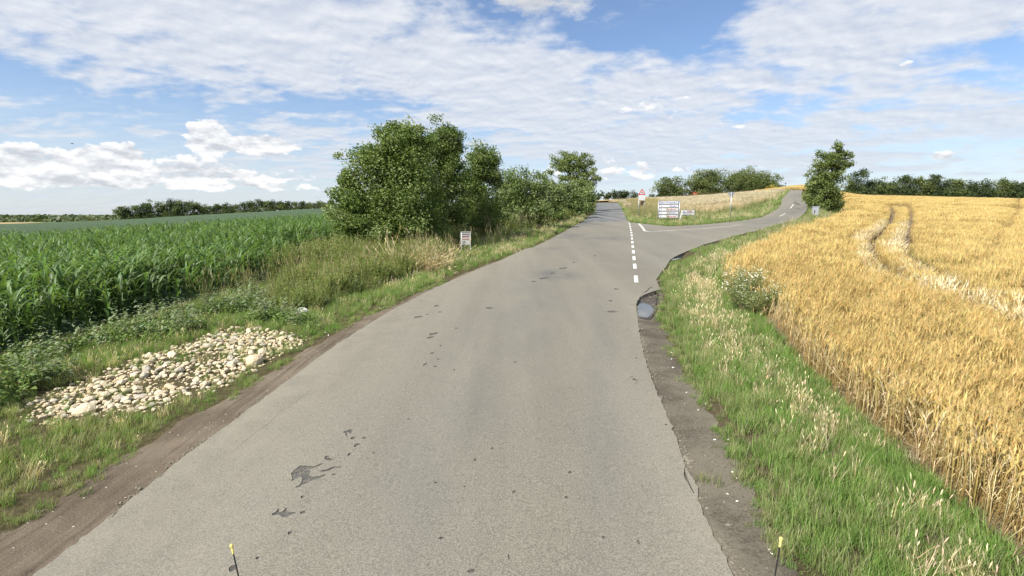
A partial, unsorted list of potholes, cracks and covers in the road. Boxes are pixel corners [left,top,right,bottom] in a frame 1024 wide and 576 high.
pothole [637,291,659,320]
